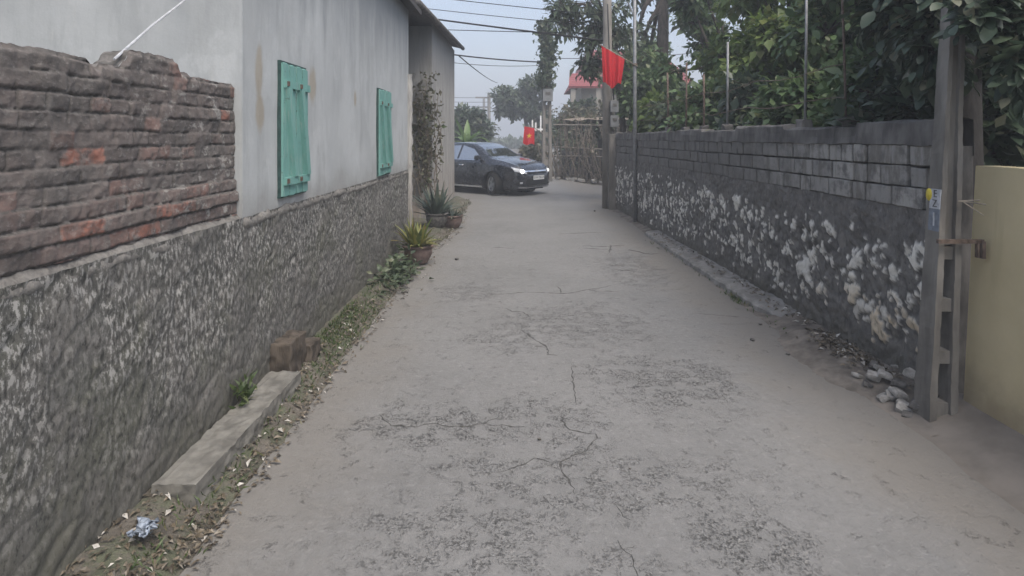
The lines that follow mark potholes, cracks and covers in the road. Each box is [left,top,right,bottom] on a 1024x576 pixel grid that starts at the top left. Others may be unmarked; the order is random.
crack [503,368,598,494]
crack [381,416,511,428]
